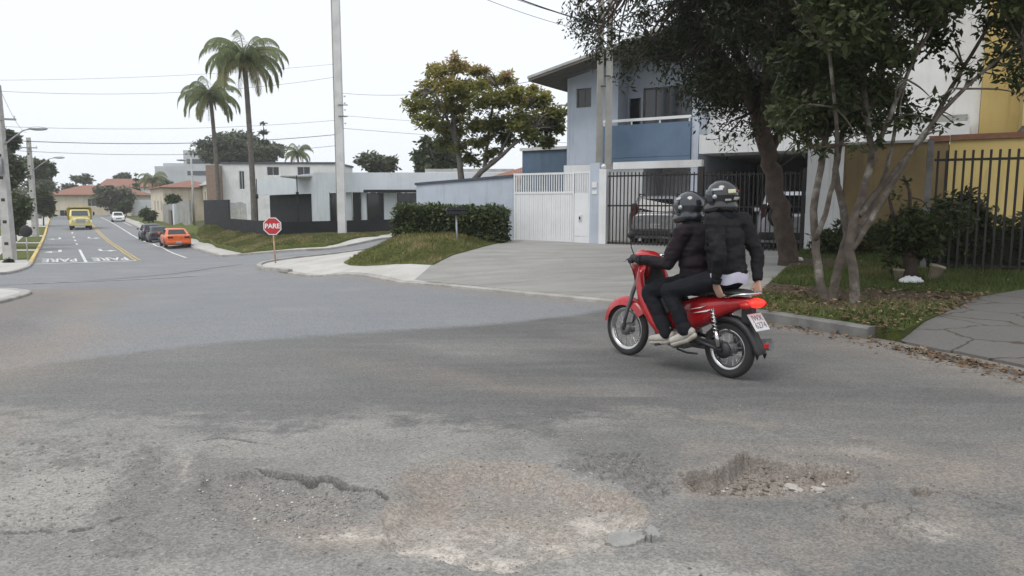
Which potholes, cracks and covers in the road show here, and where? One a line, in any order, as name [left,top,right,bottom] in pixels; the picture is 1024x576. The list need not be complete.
pothole [676,450,864,498]
pothole [906,485,936,497]
